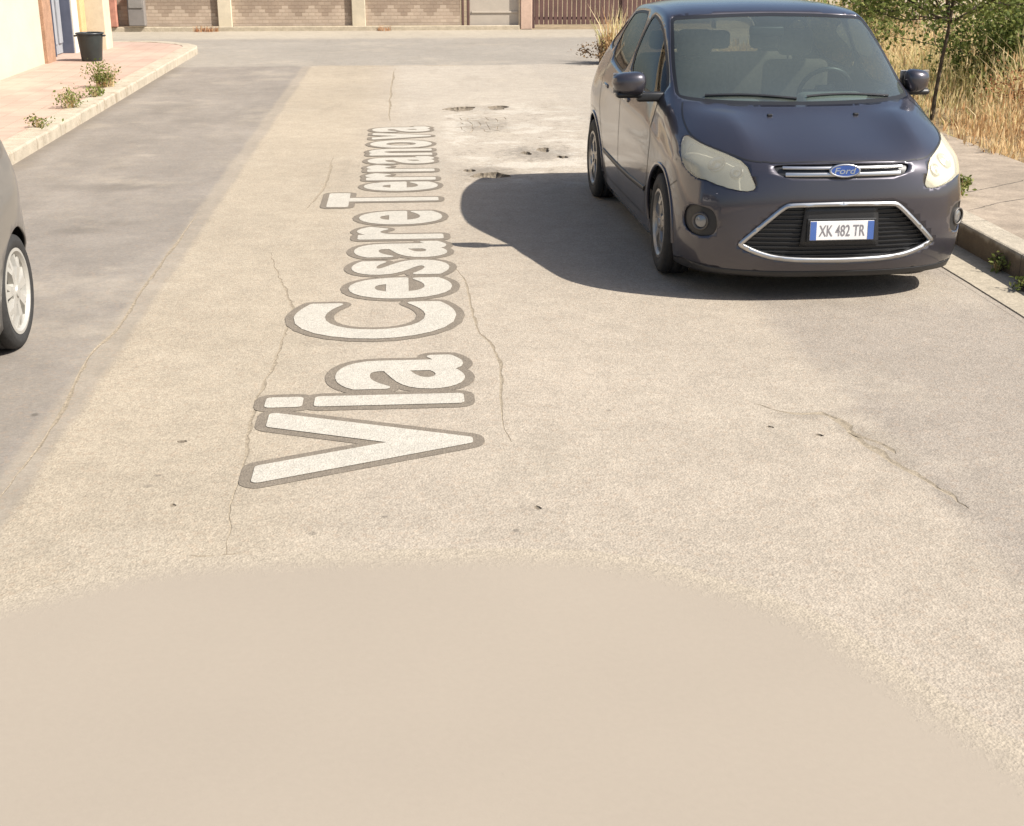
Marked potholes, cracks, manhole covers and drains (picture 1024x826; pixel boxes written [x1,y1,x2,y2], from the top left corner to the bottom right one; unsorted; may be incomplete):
crack [191,254,295,557]
crack [757,404,969,509]
crack [456,269,512,442]
